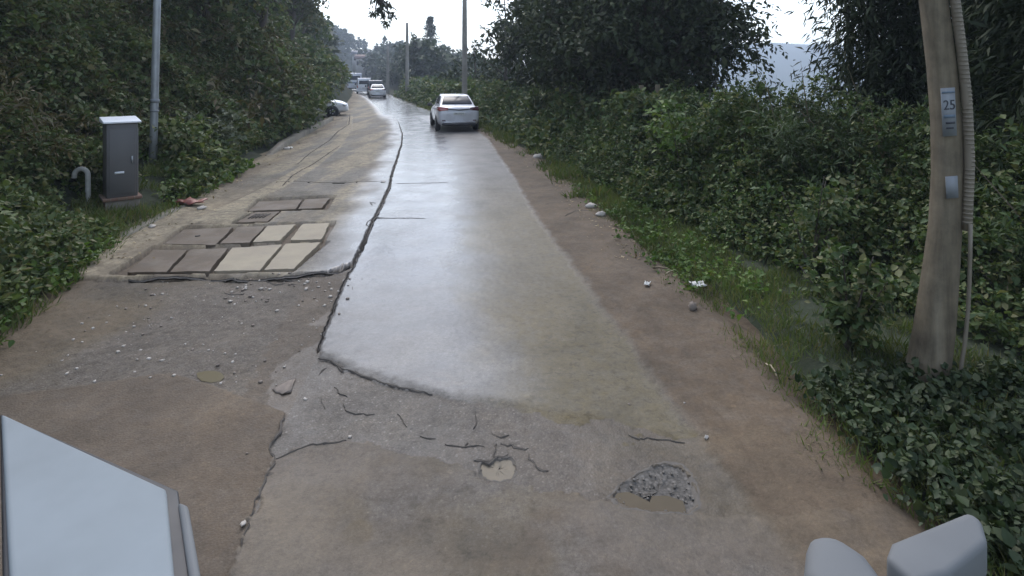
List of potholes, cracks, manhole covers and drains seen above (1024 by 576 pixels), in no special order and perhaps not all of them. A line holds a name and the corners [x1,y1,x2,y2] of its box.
crack [628,435,685,443]
pothole [606,461,702,515]
crack [397,411,549,472]
crack [241,414,285,547]
crack [318,358,433,416]
pothole [477,456,518,482]
